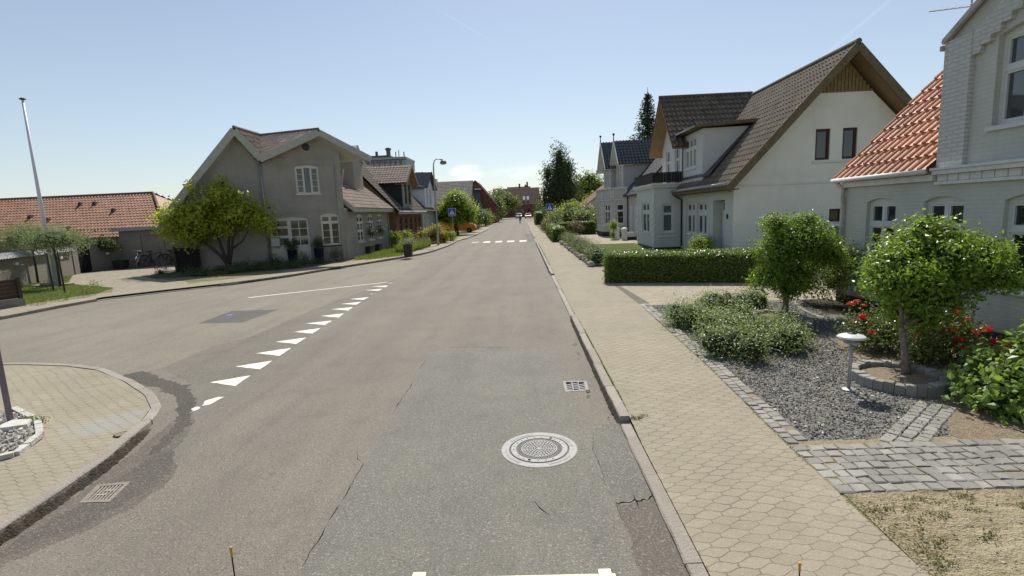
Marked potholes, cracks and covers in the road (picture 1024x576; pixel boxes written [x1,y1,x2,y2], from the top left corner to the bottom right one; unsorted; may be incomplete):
manhole cover [501,432,577,468]
drain grate [563,381,588,392]
crack [592,447,652,520]
drain grate [79,481,131,503]
crack [301,454,364,570]
